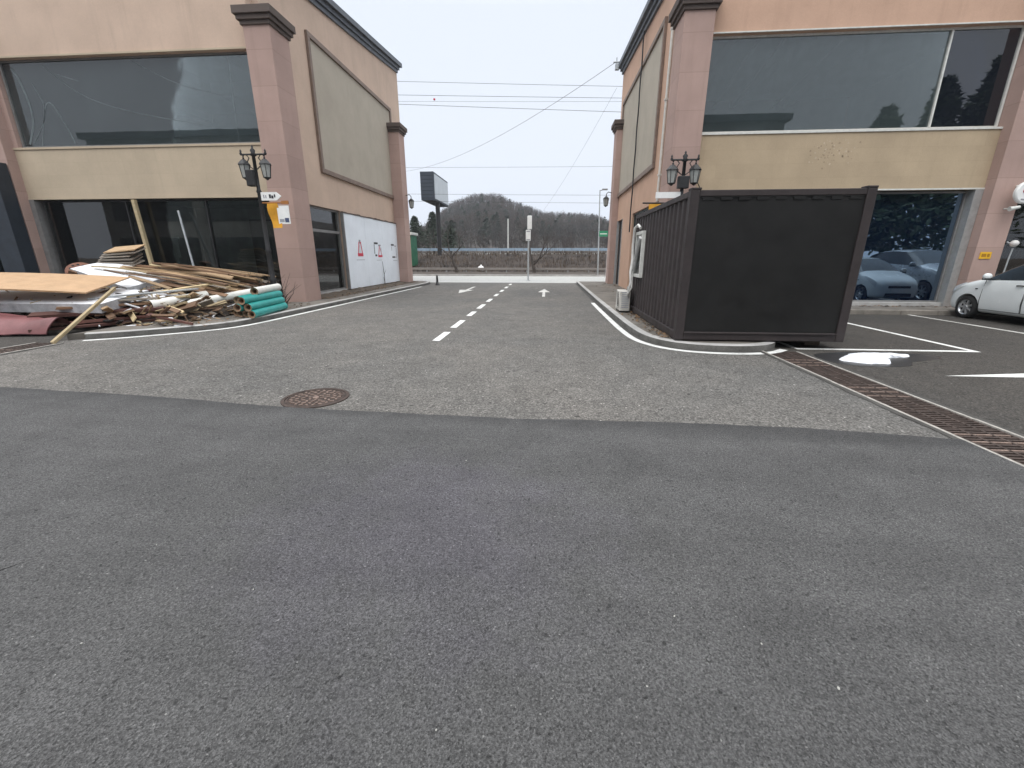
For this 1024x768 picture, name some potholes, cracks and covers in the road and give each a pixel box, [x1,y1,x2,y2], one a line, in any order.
drain grate [759,351,1024,467]
manhole cover [280,388,350,408]
